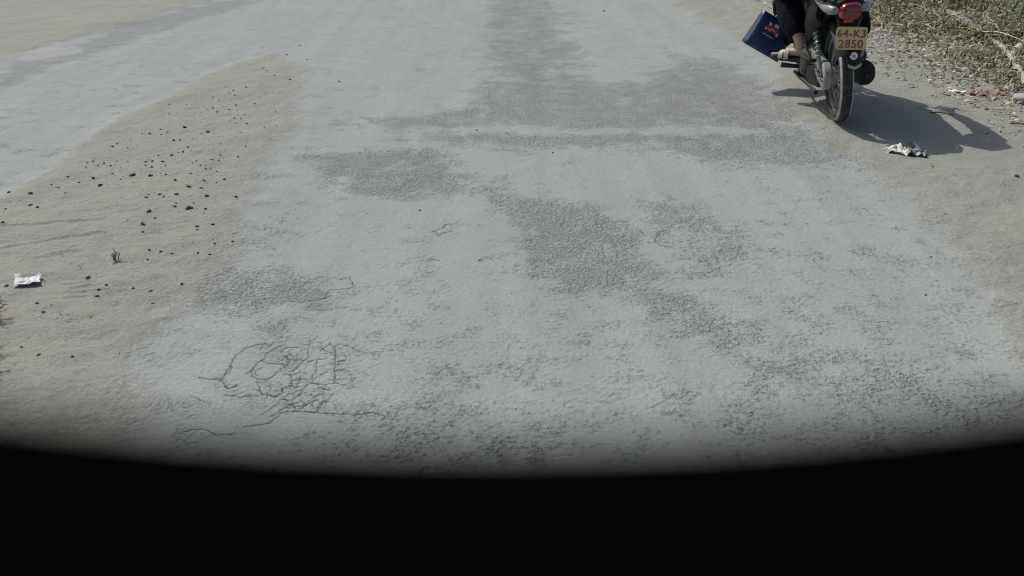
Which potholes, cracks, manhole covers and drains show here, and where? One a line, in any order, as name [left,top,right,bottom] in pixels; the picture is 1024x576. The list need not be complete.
crack [191,343,384,427]
